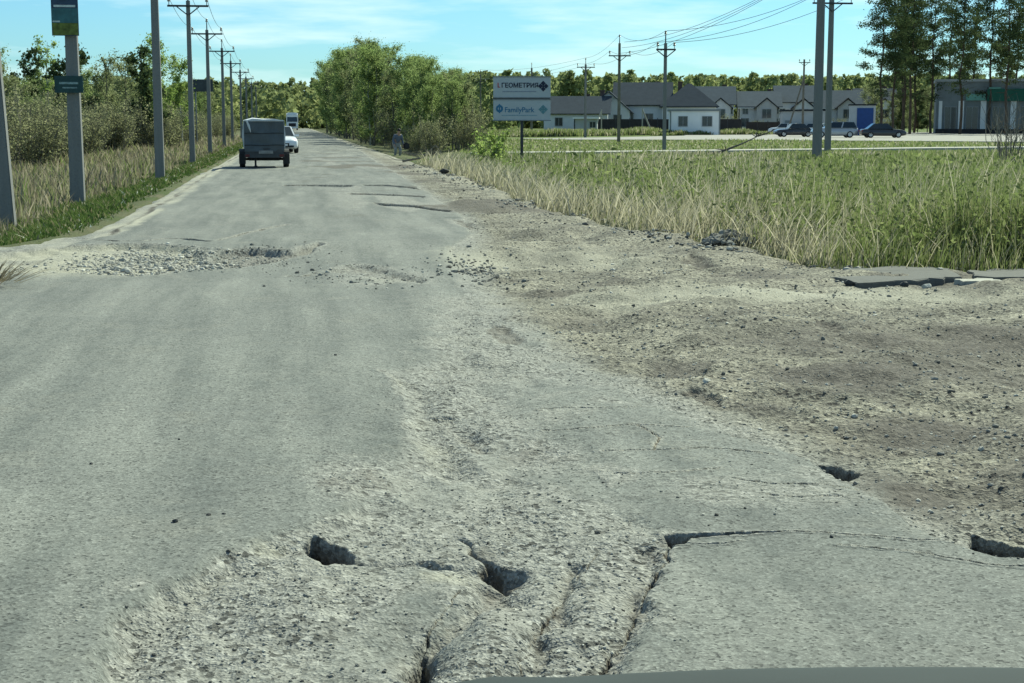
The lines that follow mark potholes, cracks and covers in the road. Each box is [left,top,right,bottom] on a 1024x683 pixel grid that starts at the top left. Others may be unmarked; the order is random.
pothole [958,532,1024,559]
crack [409,529,1024,683]
pothole [0,241,231,279]
pothole [446,534,528,601]
pothole [192,240,347,272]
pothole [802,458,872,484]
pothole [294,533,364,567]
